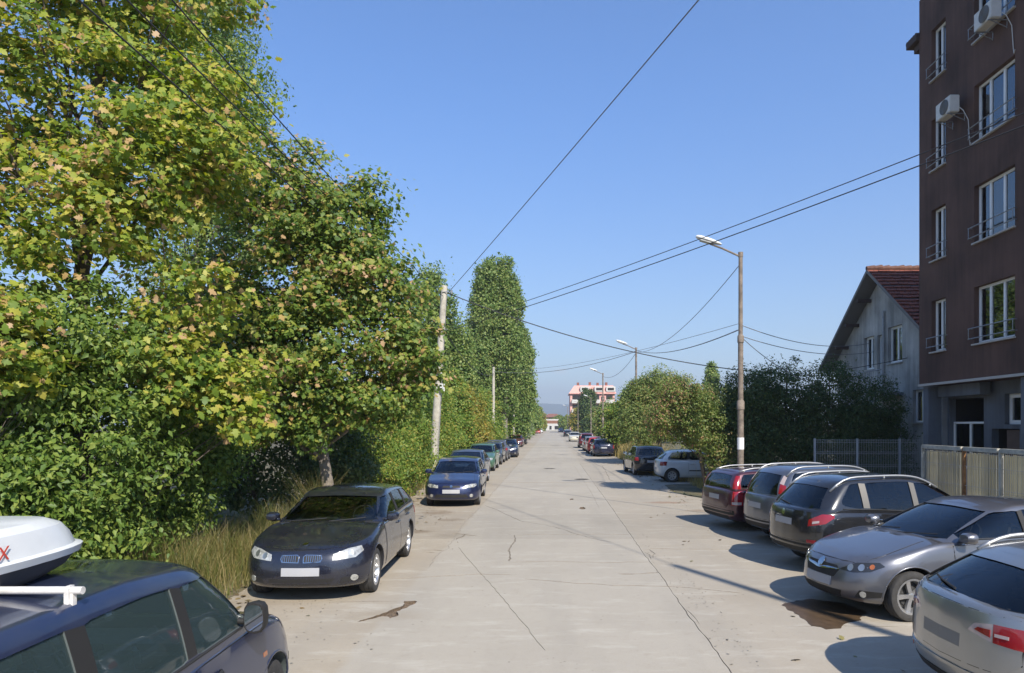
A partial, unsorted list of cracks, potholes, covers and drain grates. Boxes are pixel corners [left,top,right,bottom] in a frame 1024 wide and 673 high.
pothole [358,601,417,622]
